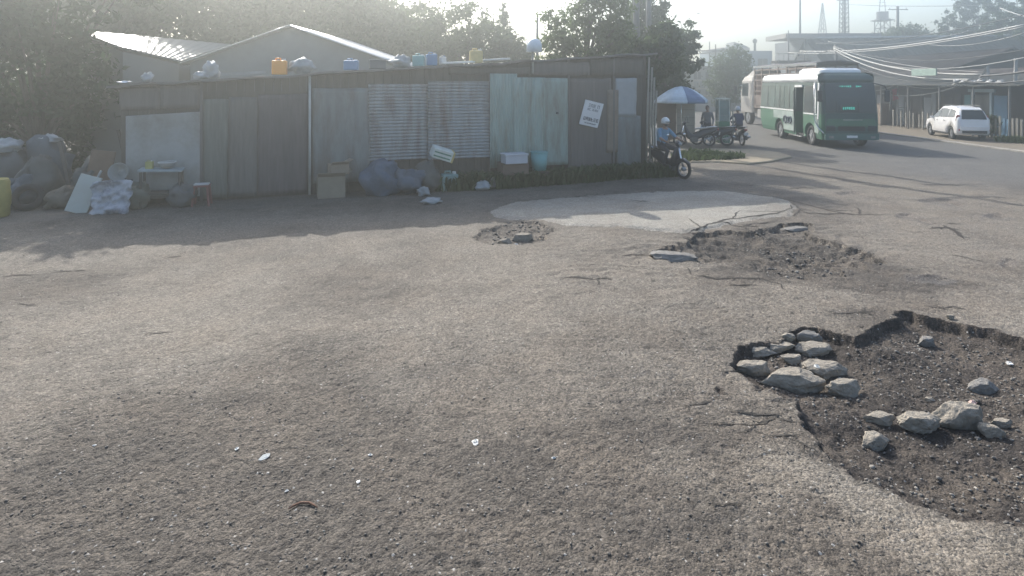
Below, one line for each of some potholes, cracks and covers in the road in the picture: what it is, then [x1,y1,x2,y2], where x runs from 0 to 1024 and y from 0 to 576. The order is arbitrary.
crack [712,370,819,454]
crack [565,276,610,284]
pothole [649,222,889,280]
crack [683,187,896,235]
pothole [469,220,559,245]
crack [932,223,984,262]
pothole [730,310,1024,527]
